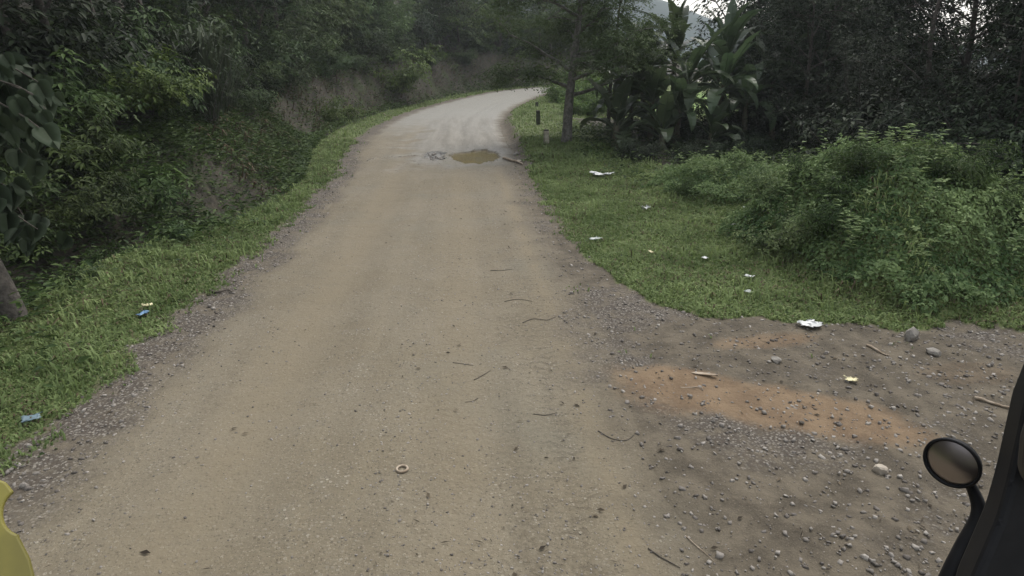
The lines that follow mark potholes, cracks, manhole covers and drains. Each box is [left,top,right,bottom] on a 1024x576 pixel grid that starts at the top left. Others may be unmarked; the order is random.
pothole [441,148,503,165]
pothole [422,151,449,161]
